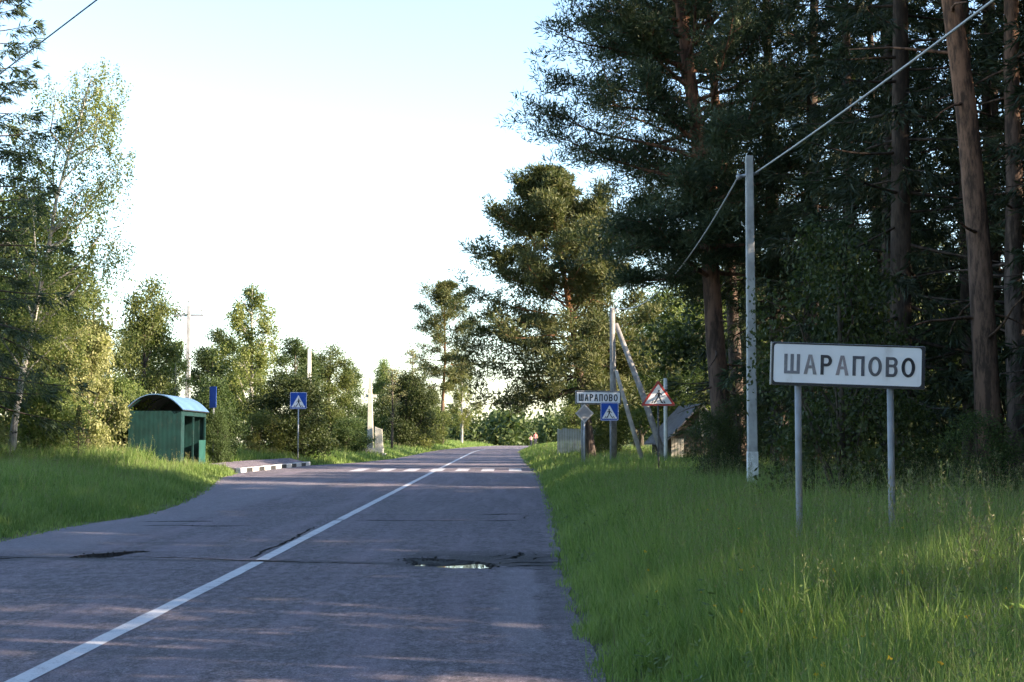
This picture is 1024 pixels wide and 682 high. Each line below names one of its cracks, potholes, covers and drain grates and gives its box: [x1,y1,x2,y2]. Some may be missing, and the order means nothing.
pothole [69,550,149,559]
pothole [397,556,501,569]
crack [128,527,376,564]
